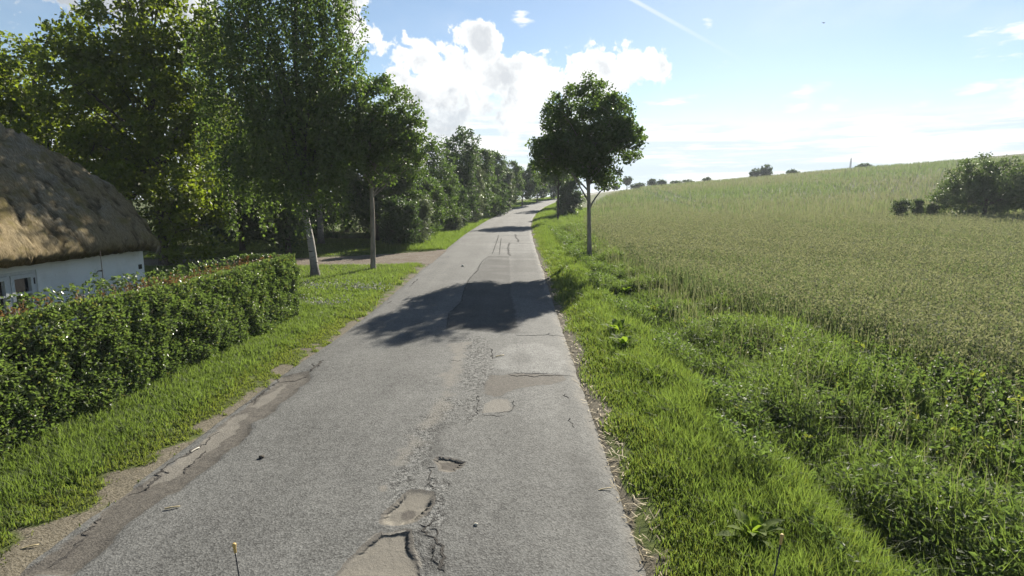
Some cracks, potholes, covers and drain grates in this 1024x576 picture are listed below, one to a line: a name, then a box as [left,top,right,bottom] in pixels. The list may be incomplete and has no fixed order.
pothole [428,454,473,476]
pothole [330,524,425,576]
crack [421,522,447,572]
crack [48,516,103,568]
pothole [371,486,443,535]
crack [133,432,219,494]
crack [246,360,324,405]
